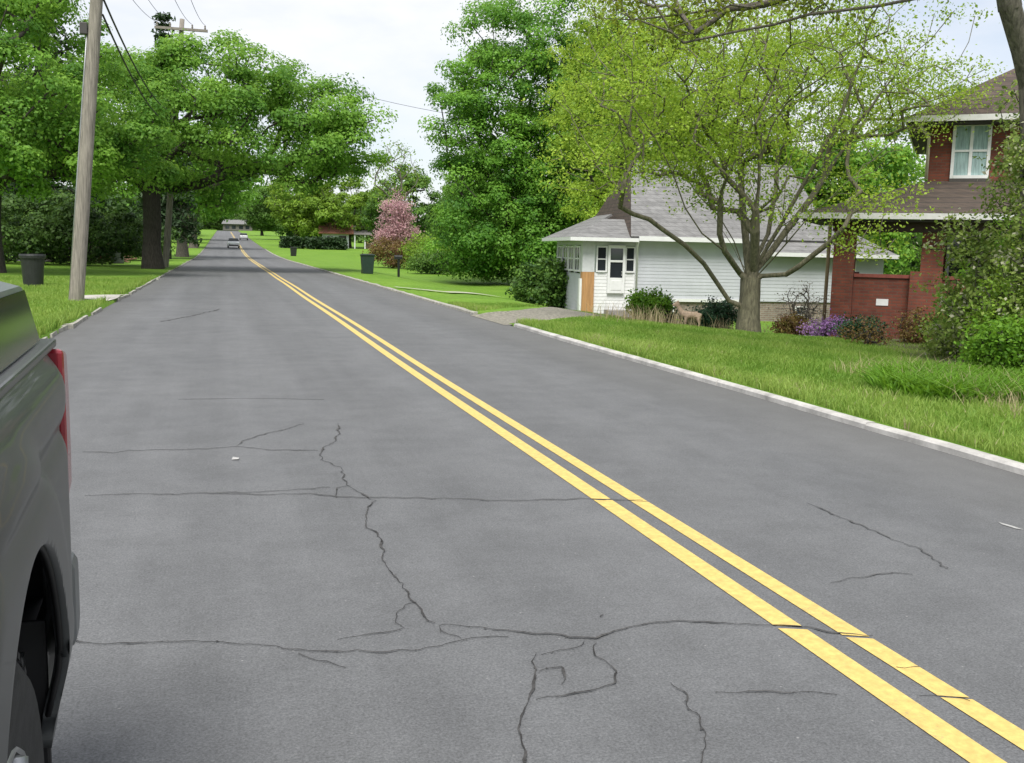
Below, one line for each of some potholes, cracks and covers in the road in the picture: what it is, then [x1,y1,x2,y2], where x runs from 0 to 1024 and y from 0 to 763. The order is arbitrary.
crack [808,503,948,568]
crack [76,614,873,763]
crack [105,425,621,627]
